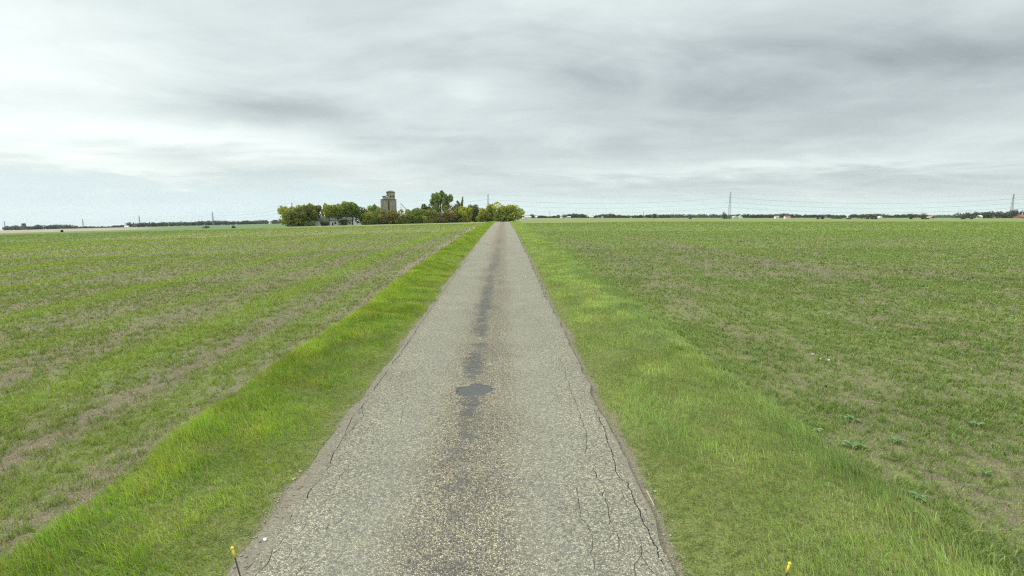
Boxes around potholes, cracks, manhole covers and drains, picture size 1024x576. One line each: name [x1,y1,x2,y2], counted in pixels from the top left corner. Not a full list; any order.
crack [560,359,666,576]
crack [244,261,466,576]
